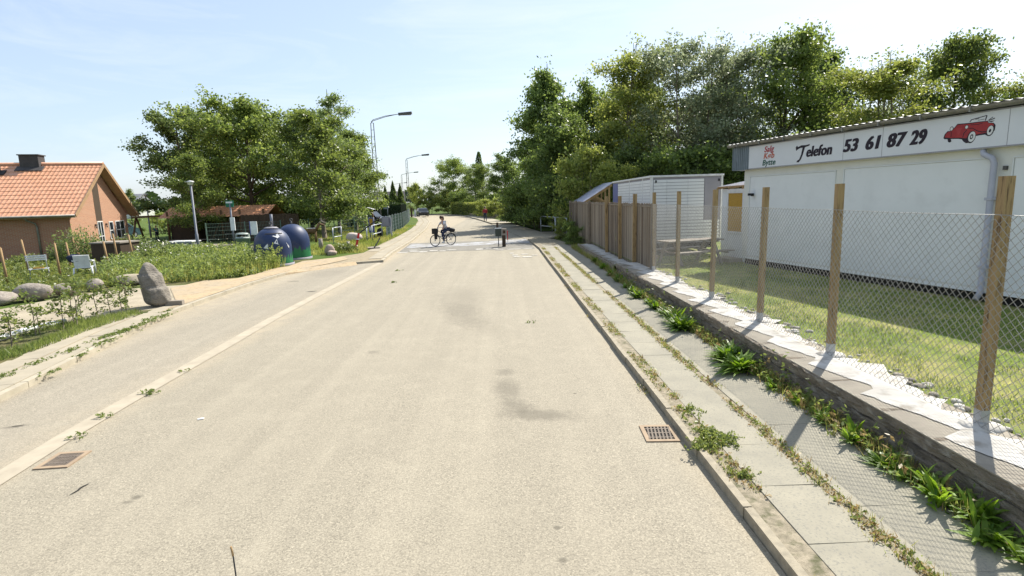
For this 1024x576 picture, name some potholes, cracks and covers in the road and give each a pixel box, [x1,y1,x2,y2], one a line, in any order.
drain grate [639,425,681,442]
drain grate [32,450,92,470]
